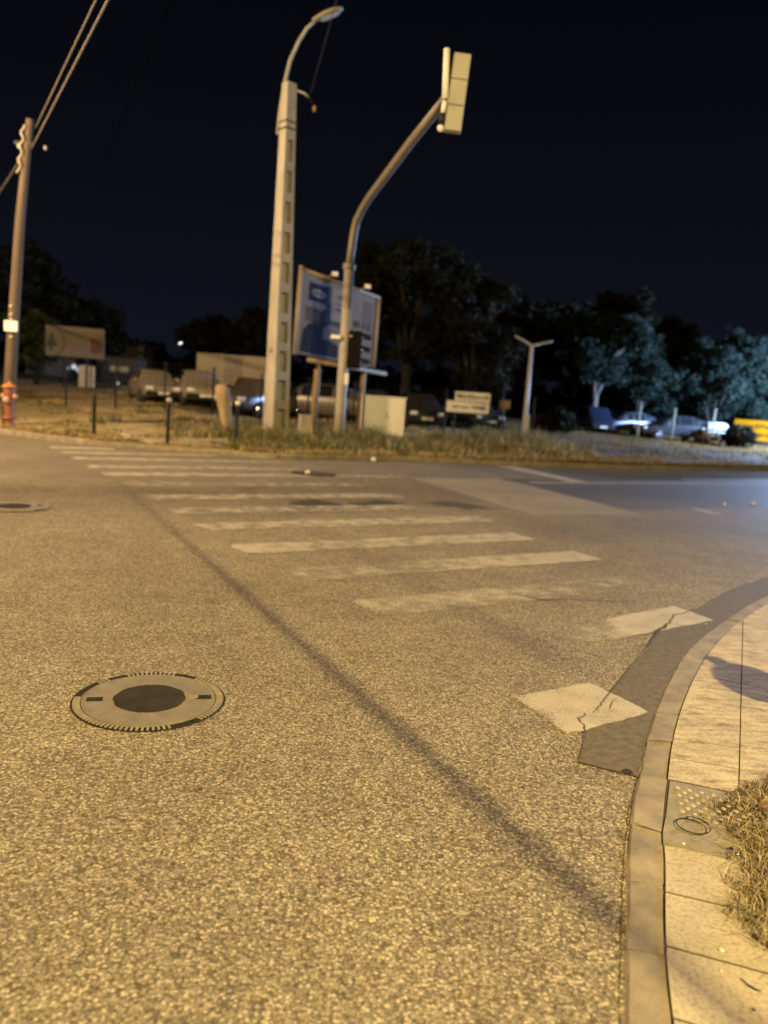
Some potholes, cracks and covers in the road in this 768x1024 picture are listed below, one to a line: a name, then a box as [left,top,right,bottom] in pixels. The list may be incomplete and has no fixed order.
crack [577,608,693,777]
manhole cover [0,501,51,512]
manhole cover [70,672,225,732]
